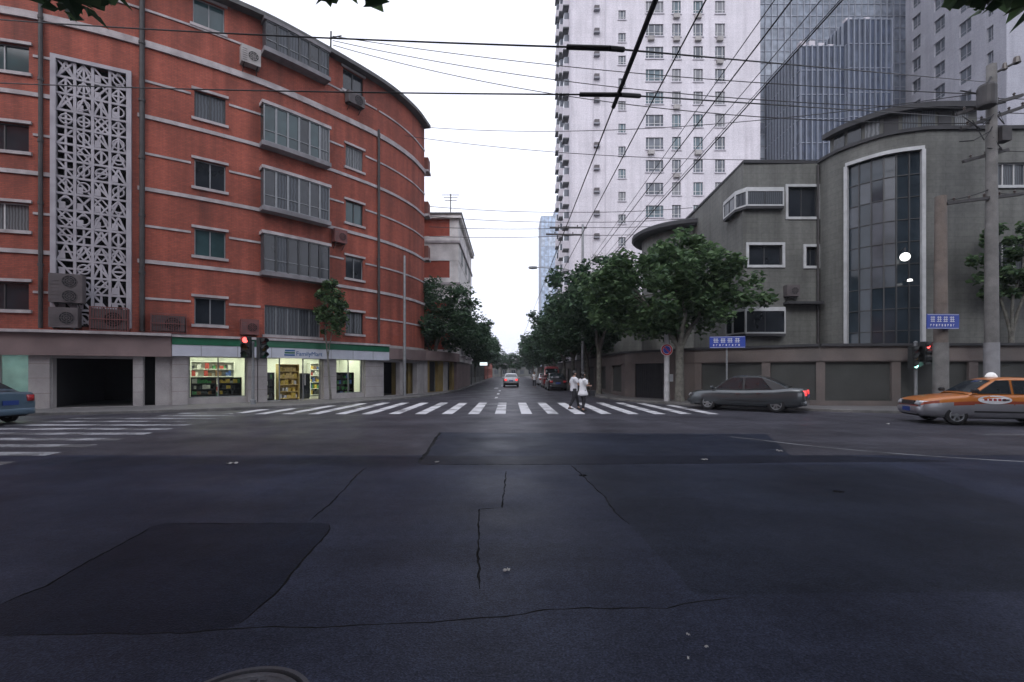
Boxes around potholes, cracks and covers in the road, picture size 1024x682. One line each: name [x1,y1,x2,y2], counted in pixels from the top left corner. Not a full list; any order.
manhole cover [204,666,309,682]
crack [13,467,744,636]
